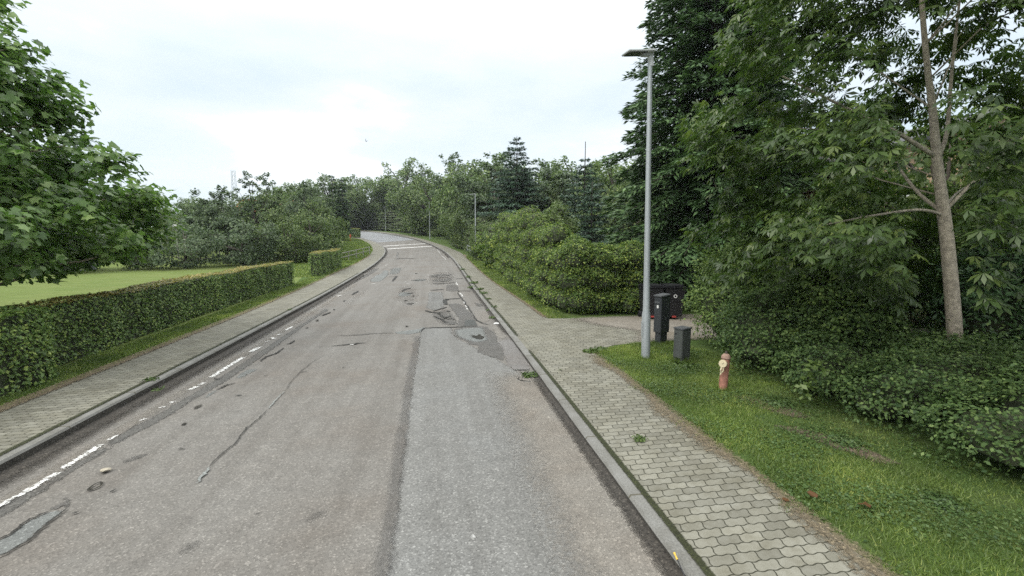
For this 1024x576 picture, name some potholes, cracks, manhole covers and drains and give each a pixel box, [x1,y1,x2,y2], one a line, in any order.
crack [209,378,267,467]
crack [260,340,315,388]
